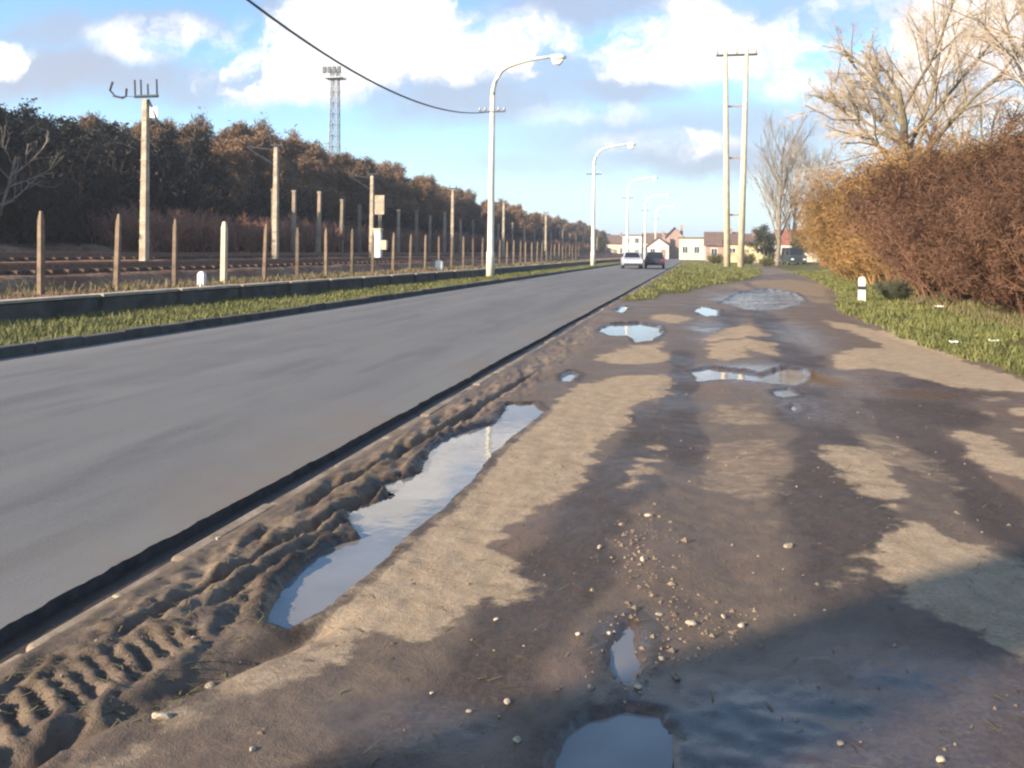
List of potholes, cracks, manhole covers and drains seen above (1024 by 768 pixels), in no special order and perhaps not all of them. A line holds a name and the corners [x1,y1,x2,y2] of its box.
pothole [719,289,805,311]
pothole [561,372,577,381]
pothole [695,307,719,316]
pothole [263,404,544,629]
pothole [598,322,663,343]
pothole [601,622,644,685]
pothole [545,704,674,768]
pothole [773,389,796,397]
pothole [690,366,808,385]
